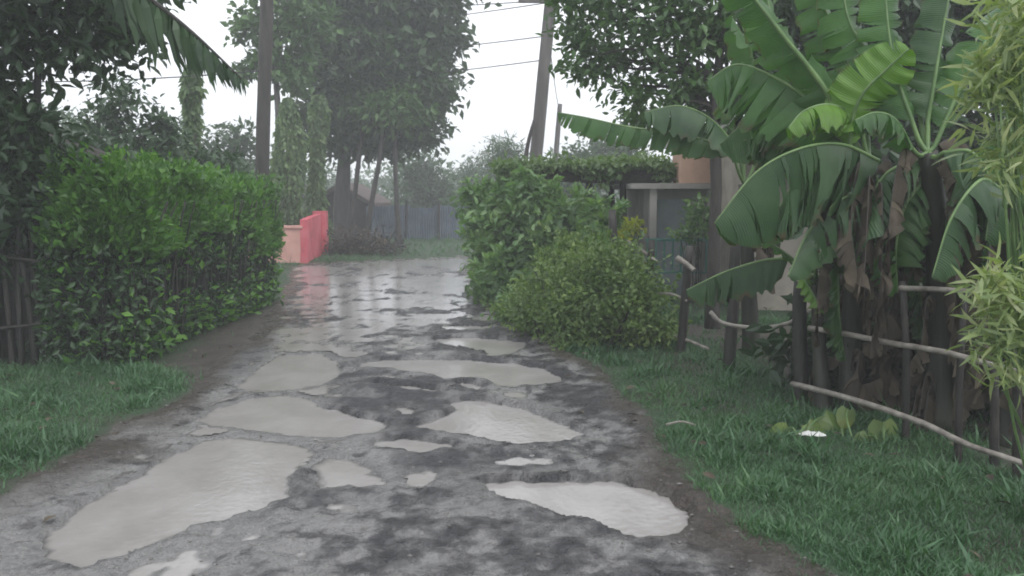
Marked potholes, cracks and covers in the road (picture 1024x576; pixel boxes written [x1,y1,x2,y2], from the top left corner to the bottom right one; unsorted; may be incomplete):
pothole [229,351,355,391]
pothole [423,331,541,356]
pothole [19,430,328,572]
pothole [360,427,471,454]
pothole [461,466,717,540]
pothole [396,390,603,447]
pothole [440,378,497,391]
pothole [347,352,576,389]
pothole [296,446,408,493]
pothole [179,389,403,440]
